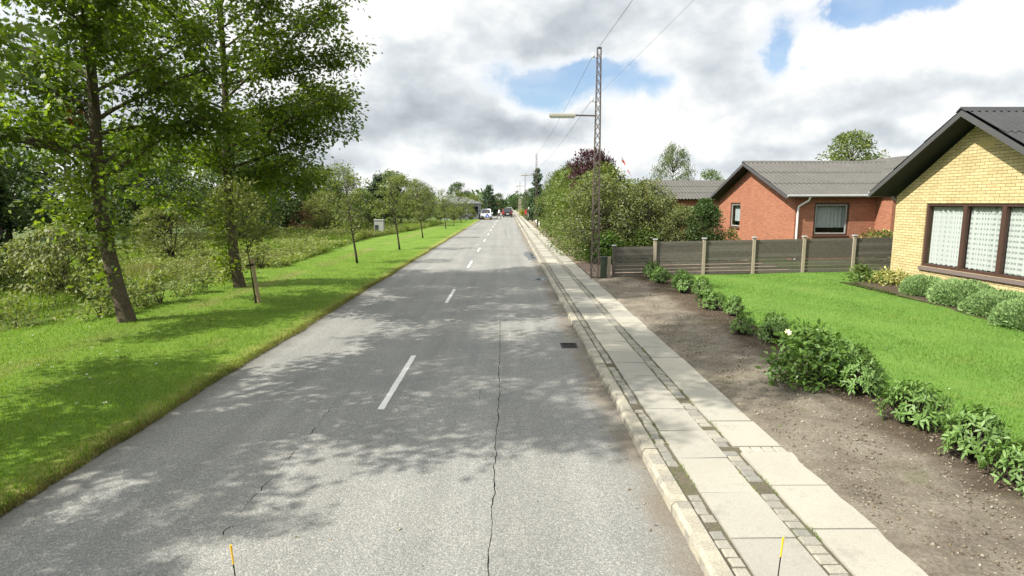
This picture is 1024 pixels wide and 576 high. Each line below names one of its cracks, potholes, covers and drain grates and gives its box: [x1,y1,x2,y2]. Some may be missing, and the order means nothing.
crack [479,320,501,576]
